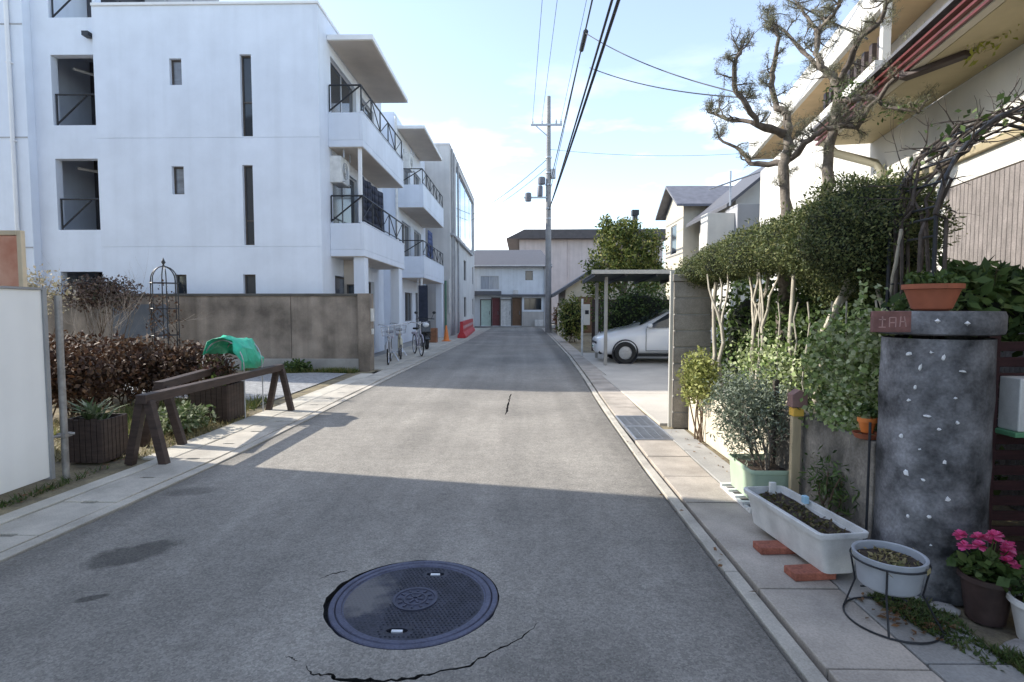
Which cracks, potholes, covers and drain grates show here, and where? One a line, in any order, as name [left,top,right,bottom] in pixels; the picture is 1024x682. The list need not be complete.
drain grate [615,415,675,441]
crack [285,623,537,682]
manhole cover [323,560,499,650]
